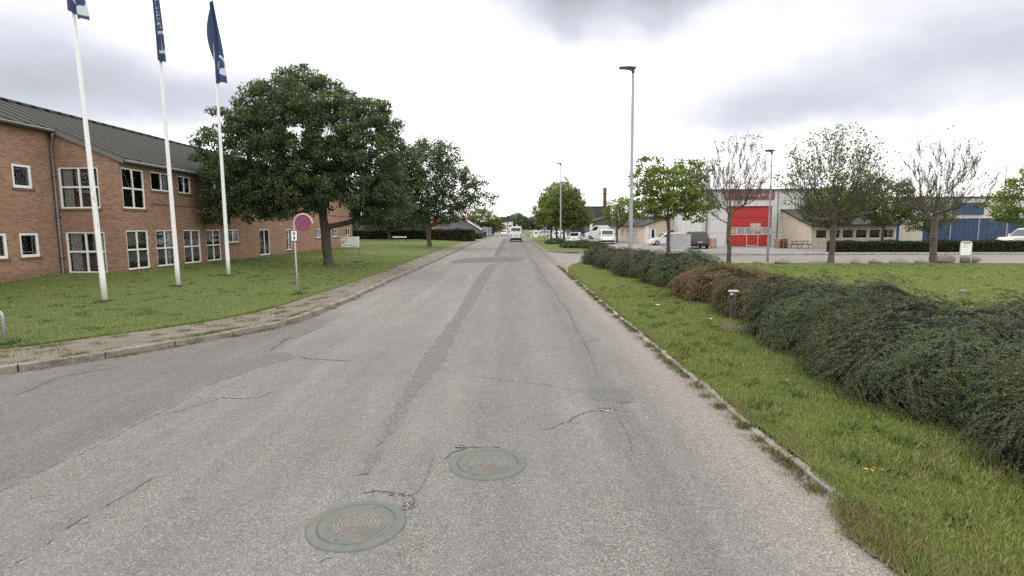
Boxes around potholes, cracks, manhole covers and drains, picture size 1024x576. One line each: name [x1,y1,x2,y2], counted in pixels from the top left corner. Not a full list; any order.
crack [616,401,636,452]
crack [10,478,152,567]
crack [355,446,501,496]
crack [270,337,345,361]
manhole cover [305,500,406,553]
manhole cover [449,447,527,481]
